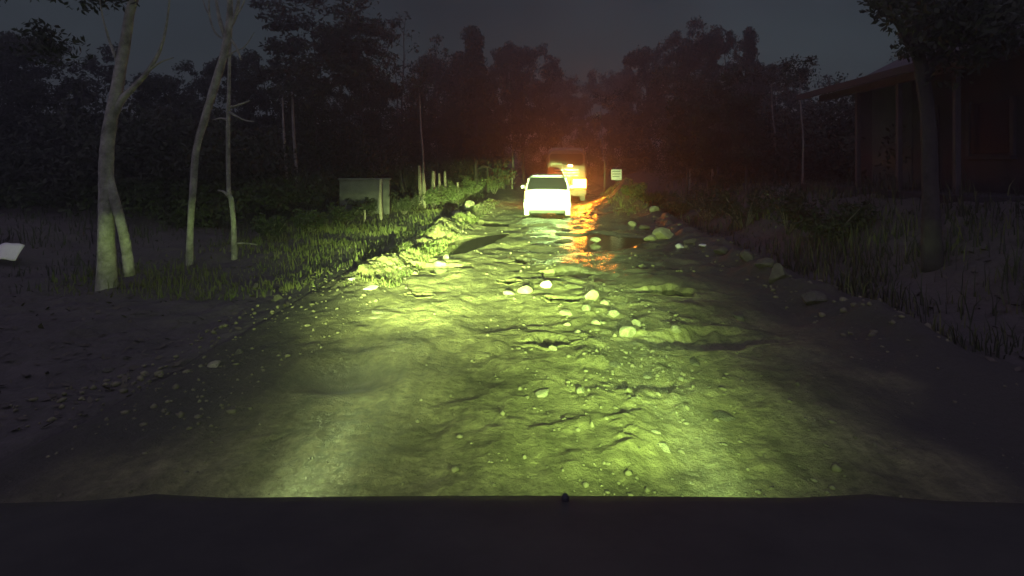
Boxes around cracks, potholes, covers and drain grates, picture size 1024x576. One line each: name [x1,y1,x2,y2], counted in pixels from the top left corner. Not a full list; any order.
pothole [407,231,515,258]
pothole [507,332,583,351]
pothole [547,229,667,254]
